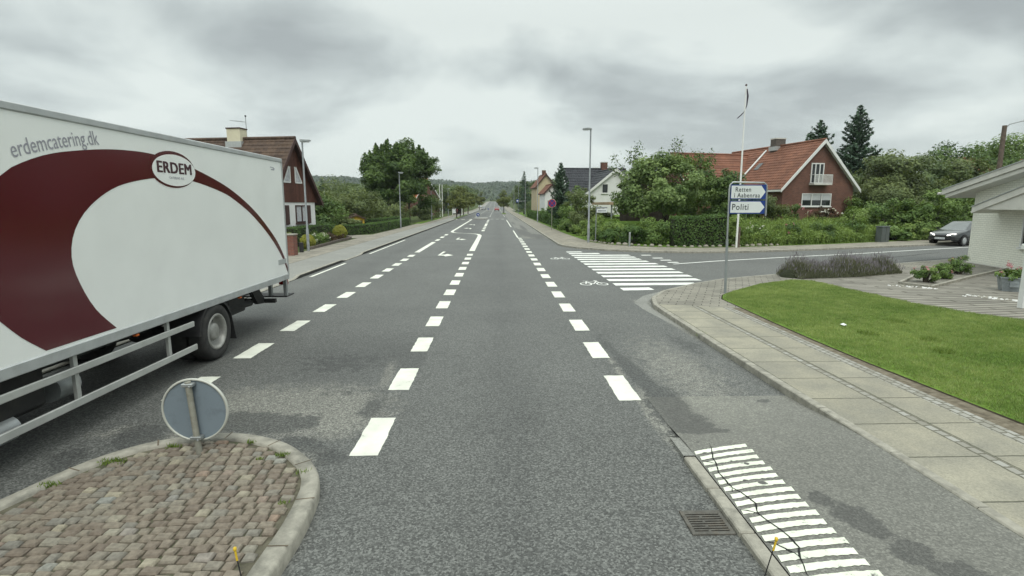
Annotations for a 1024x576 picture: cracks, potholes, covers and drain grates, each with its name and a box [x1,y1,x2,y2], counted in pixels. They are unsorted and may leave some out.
crack [705,443,808,575]
drain grate [679,510,736,536]
